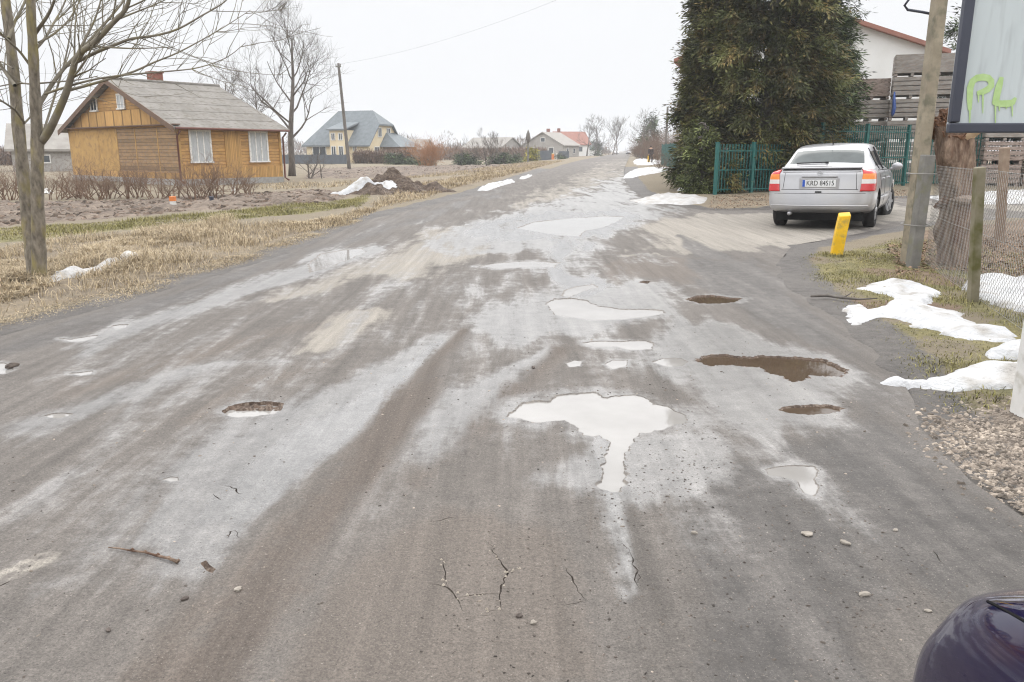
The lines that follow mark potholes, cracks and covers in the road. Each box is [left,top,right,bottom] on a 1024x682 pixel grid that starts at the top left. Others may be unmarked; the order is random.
pothole [779,404,847,415]
pothole [545,298,666,321]
crack [427,543,521,614]
pothole [222,401,284,418]
pothole [695,354,850,382]
pothole [605,360,628,369]
pothole [506,391,688,492]
pothole [764,465,820,496]
pothole [583,340,654,350]
pothole [686,295,742,304]
